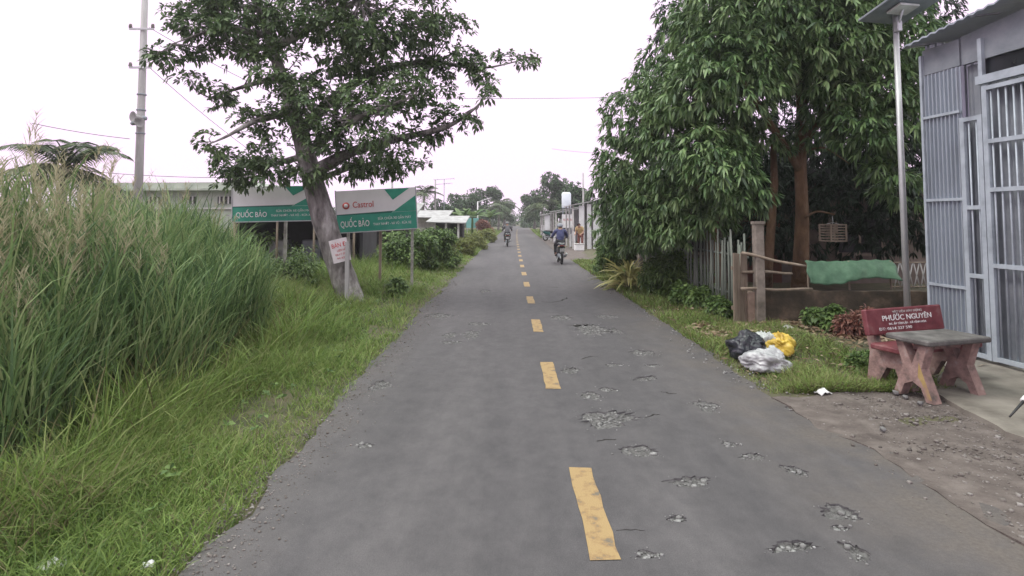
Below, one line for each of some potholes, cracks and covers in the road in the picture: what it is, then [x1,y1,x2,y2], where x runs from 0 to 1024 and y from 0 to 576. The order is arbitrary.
pothole [738,453,770,461]
pothole [577,391,604,401]
pothole [630,547,664,560]
pothole [611,444,664,457]
pothole [689,399,723,413]
pothole [573,407,653,430]
pothole [460,328,481,339]
pothole [764,540,825,553]
pothole [779,465,808,478]
pothole [813,502,873,525]
pothole [836,540,871,566]
pothole [569,322,612,337]
